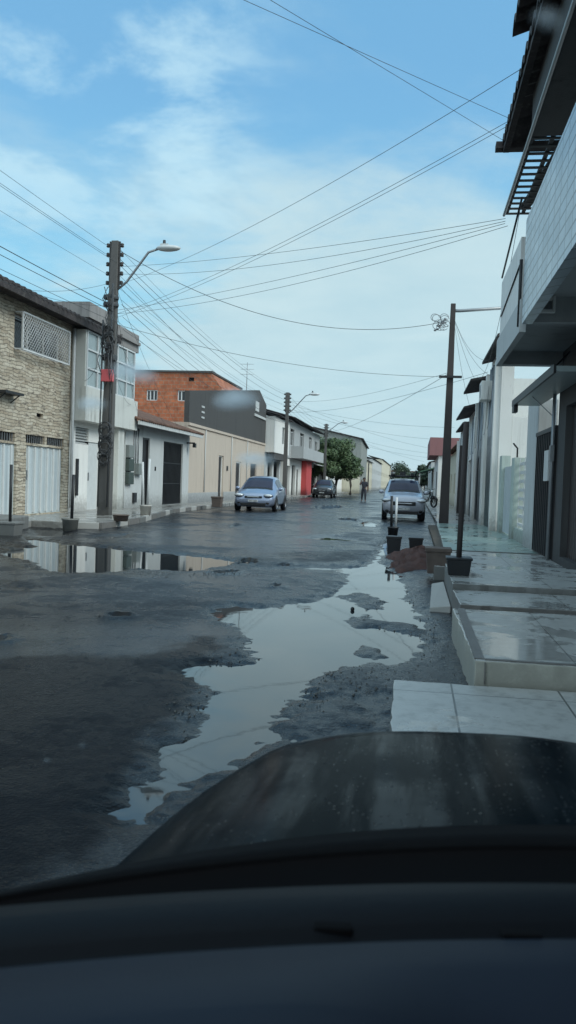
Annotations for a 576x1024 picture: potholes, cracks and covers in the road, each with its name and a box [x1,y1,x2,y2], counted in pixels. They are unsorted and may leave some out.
pothole [0,538,239,573]
pothole [112,542,422,821]
